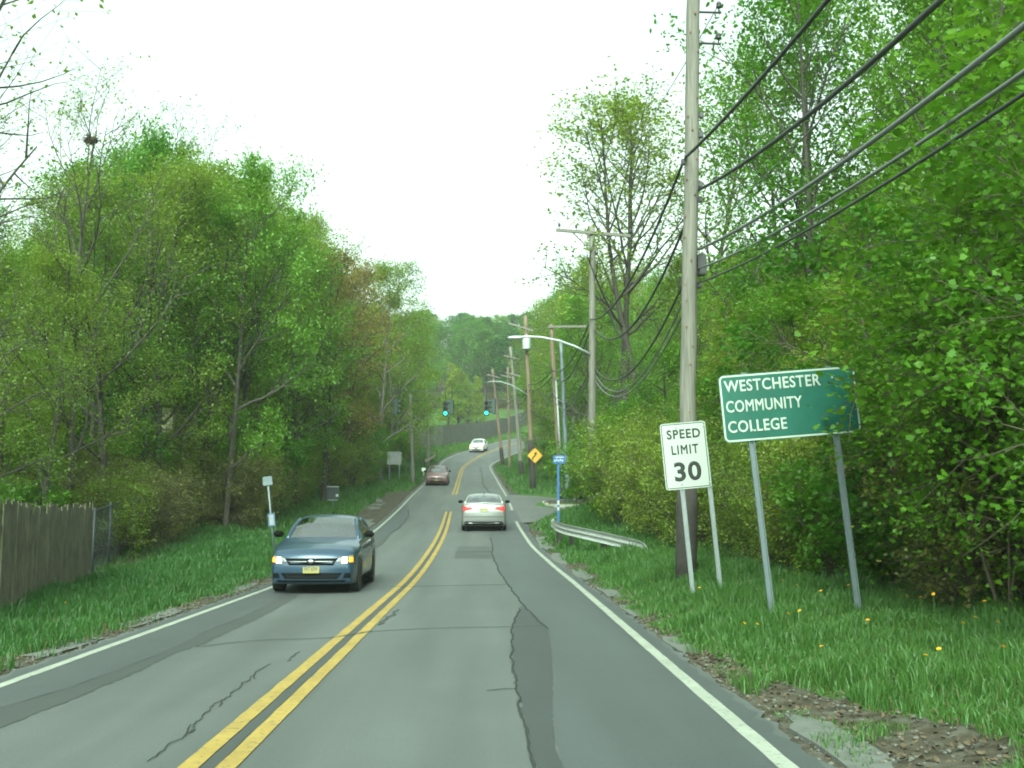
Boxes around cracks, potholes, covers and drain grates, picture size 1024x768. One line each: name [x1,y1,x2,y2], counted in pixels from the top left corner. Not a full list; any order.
crack [148,538,549,768]
